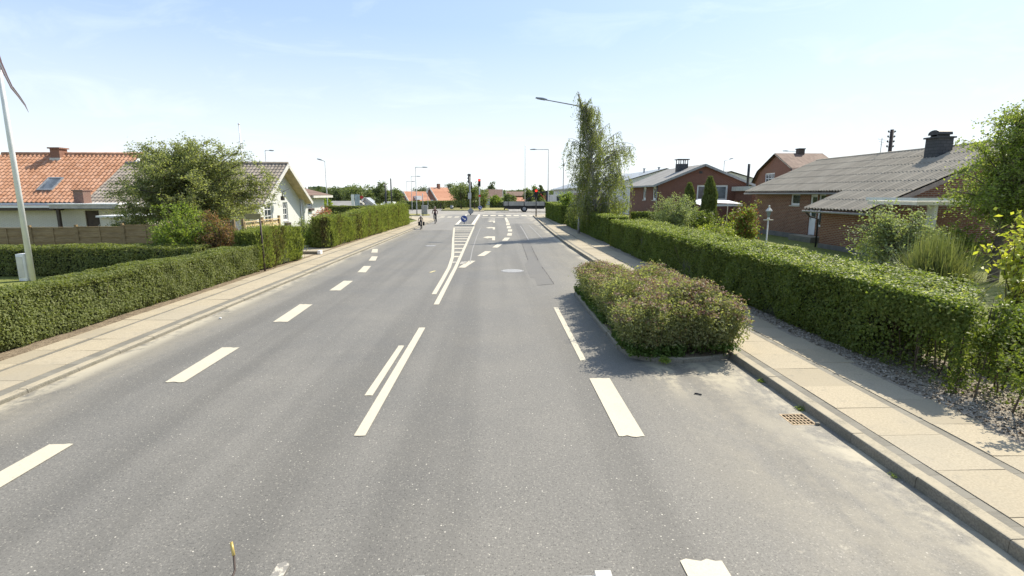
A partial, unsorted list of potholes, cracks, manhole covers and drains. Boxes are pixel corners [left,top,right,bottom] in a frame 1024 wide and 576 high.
drain grate [779,414,816,425]
